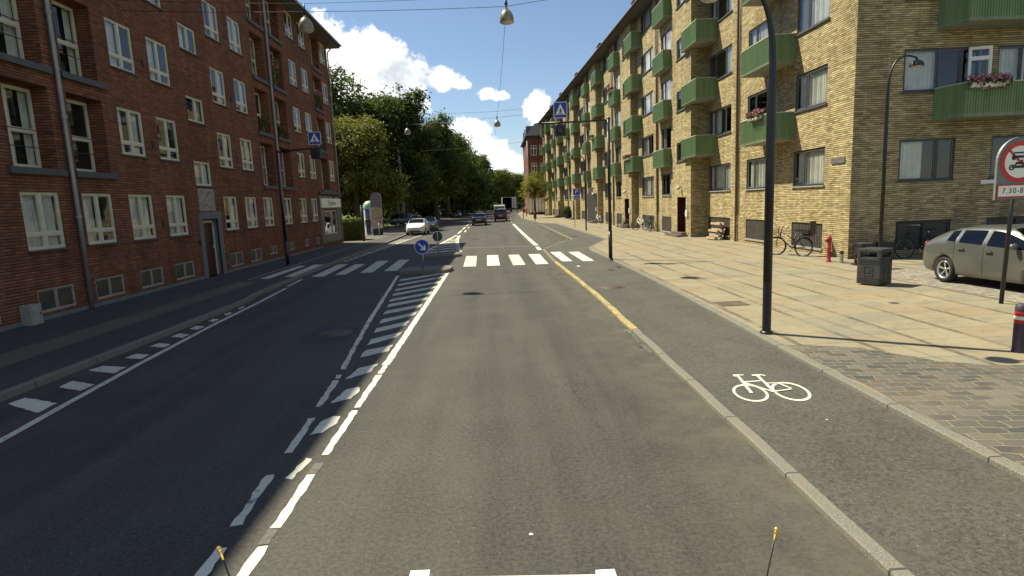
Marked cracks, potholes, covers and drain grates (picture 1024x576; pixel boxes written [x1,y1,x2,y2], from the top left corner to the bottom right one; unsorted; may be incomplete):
manhole cover [320,329,353,337]
